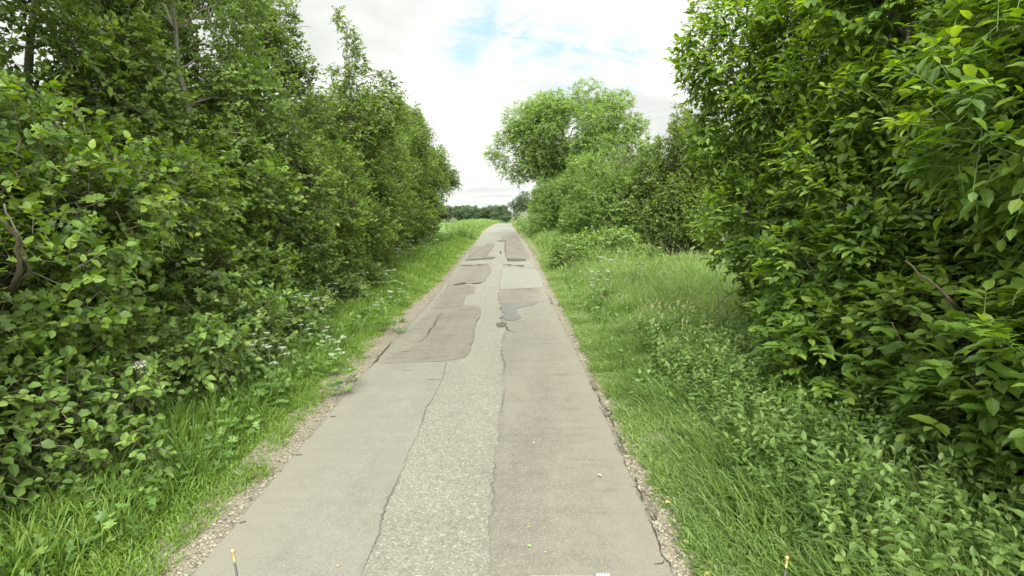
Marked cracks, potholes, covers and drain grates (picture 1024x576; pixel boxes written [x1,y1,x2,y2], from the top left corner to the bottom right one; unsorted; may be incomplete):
crack [648,519,672,570]
crack [488,326,510,542]
crack [369,312,481,554]
